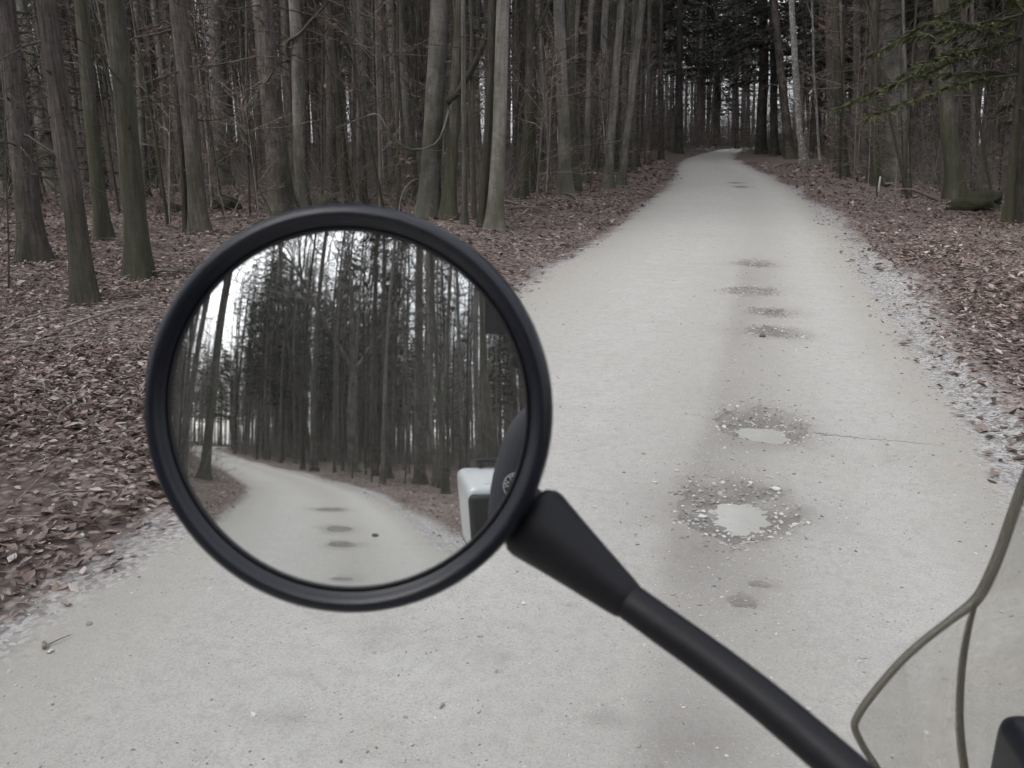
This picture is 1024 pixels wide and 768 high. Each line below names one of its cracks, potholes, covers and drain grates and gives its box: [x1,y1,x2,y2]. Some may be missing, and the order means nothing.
pothole [749,308,787,317]
pothole [731,287,774,296]
pothole [745,326,799,337]
pothole [726,591,759,609]
pothole [748,580,774,588]
pothole [714,407,808,444]
pothole [677,478,804,545]
